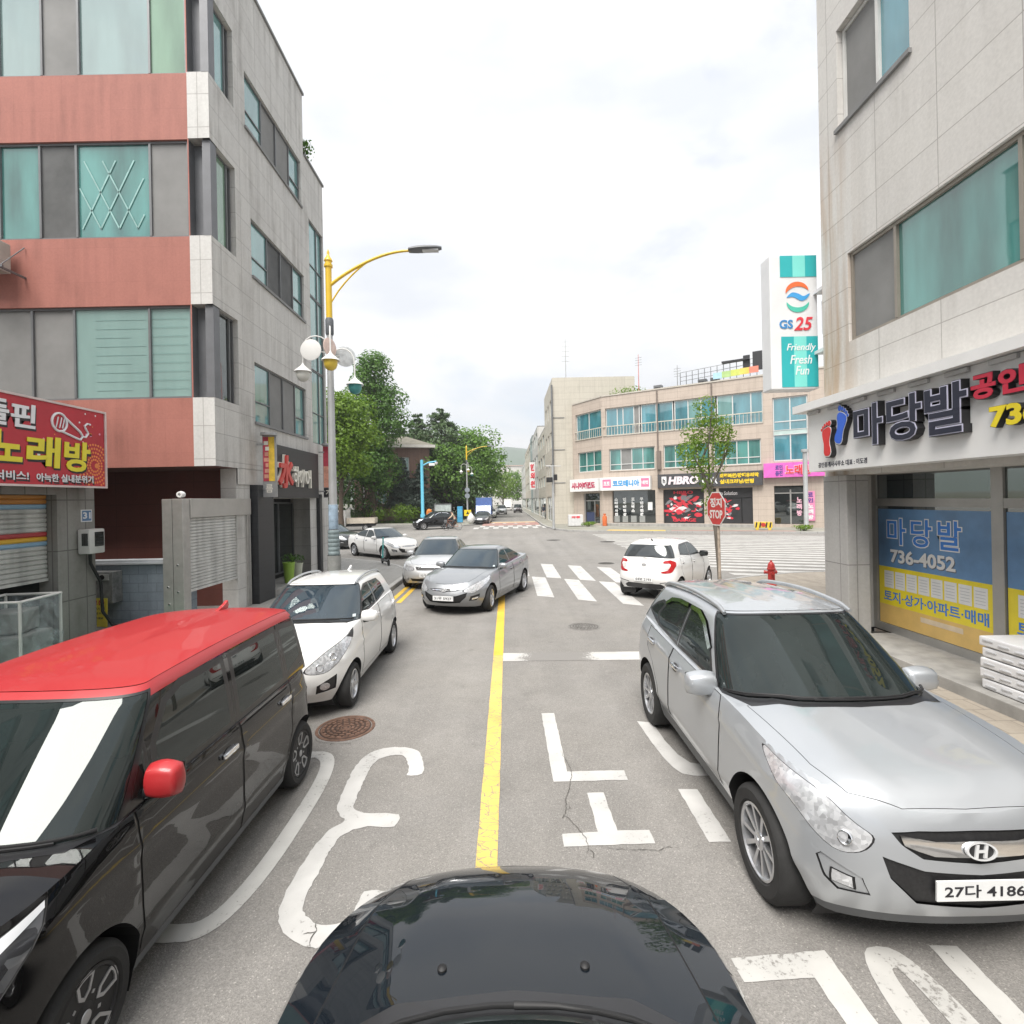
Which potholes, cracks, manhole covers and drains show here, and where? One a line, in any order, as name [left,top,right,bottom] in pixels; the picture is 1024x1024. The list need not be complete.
crack [560,750,594,859]
manhole cover [315,715,375,742]
manhole cover [568,622,600,631]
